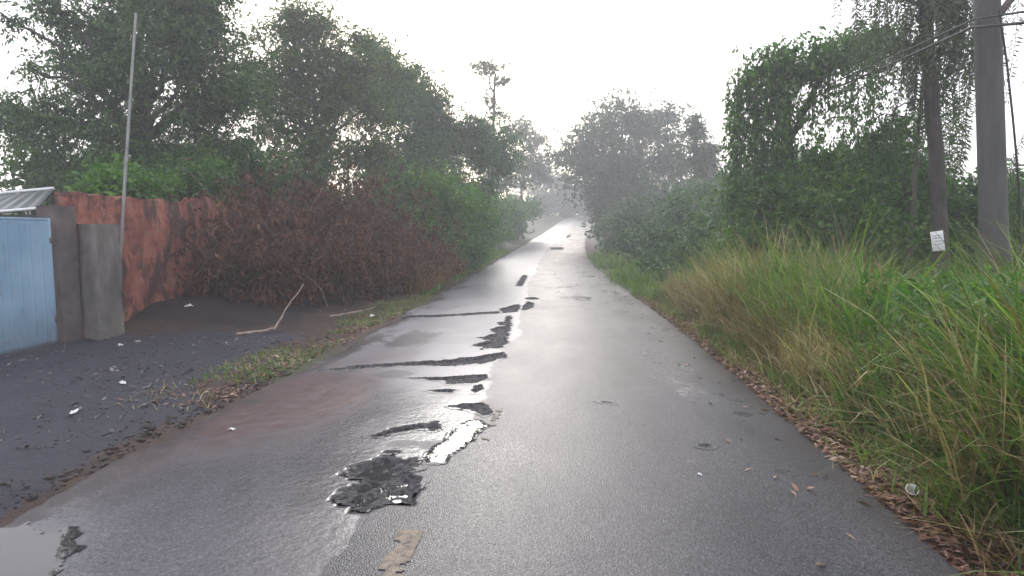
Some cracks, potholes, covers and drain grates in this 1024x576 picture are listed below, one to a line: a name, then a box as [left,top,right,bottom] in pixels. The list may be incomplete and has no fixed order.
pothole [361,420,447,438]
pothole [444,401,499,417]
pothole [331,450,432,513]
pothole [498,304,522,313]
pothole [422,419,489,465]
pothole [402,373,493,385]
pothole [691,441,720,450]
